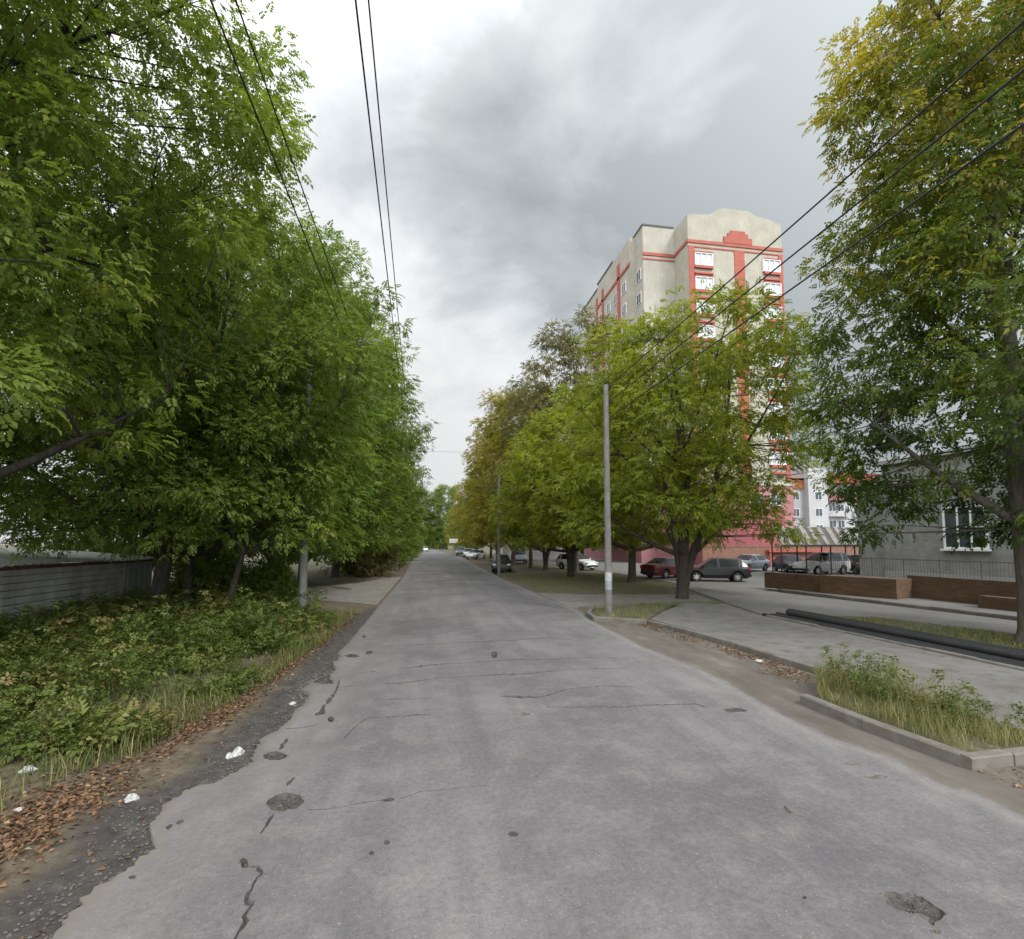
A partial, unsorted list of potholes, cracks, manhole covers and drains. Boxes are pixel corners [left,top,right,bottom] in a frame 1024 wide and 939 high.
pothole [266,793,304,811]
pothole [263,751,287,760]
crack [234,866,264,939]
crack [260,814,274,834]
crack [500,686,706,708]
pothole [885,892,946,926]
crack [307,785,487,810]
crack [279,657,622,750]
